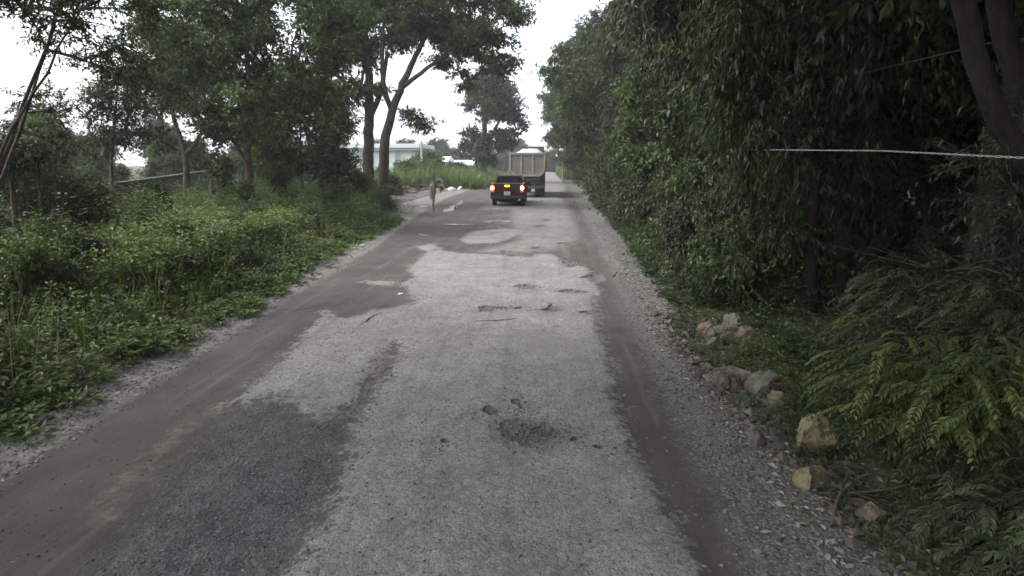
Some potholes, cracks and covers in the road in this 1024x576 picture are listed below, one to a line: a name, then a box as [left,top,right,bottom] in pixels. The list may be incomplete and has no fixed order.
pothole [497,418,564,448]
pothole [482,405,500,415]
